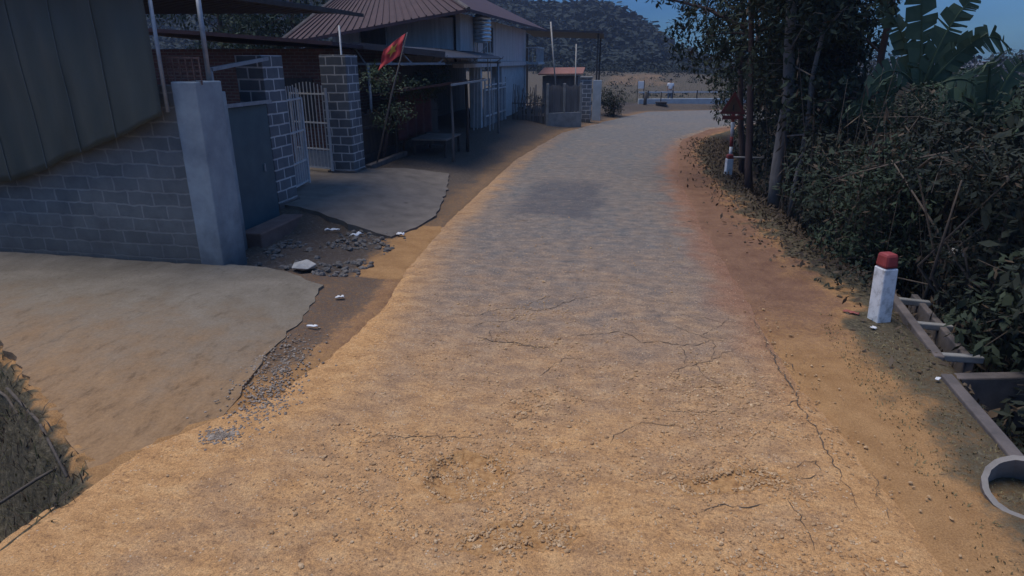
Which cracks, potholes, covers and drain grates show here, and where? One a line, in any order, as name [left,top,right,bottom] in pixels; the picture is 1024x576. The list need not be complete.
crack [450,296,592,347]
pothole [419,448,516,505]
crack [750,314,858,546]
crack [587,314,758,387]
